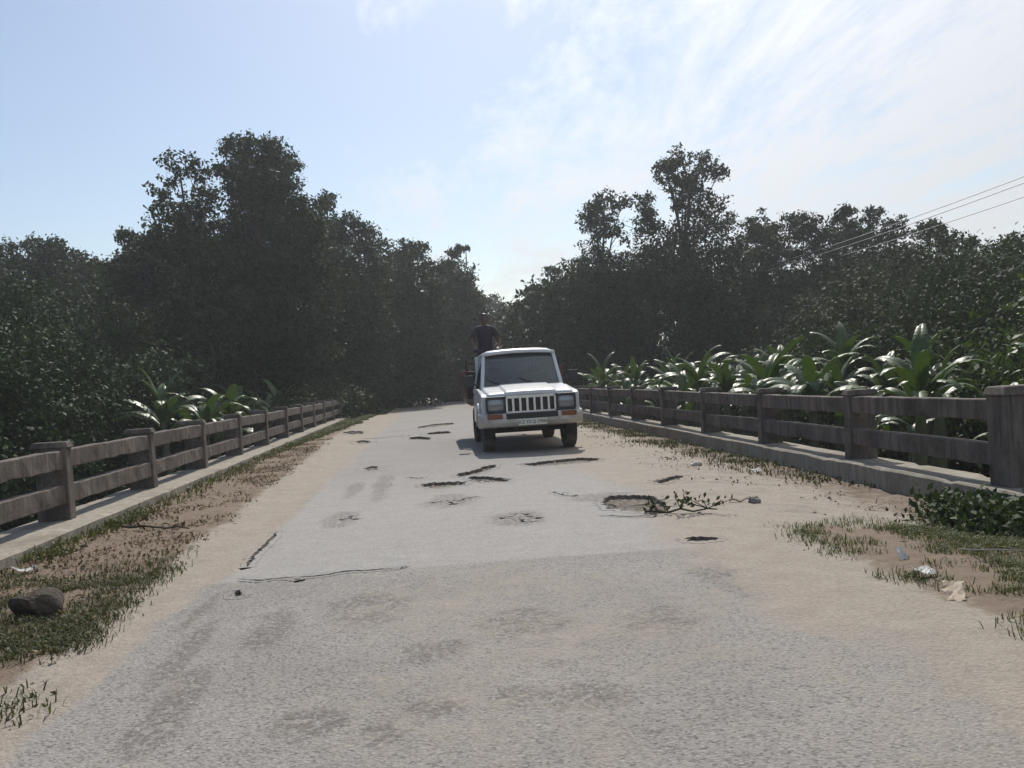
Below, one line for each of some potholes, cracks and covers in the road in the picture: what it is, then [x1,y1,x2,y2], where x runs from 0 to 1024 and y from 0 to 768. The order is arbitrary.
pothole [515,457,604,467]
pothole [675,535,728,544]
pothole [414,481,472,489]
crack [237,532,401,583]
pothole [593,494,678,515]
pothole [646,475,690,485]
pothole [450,464,501,478]
